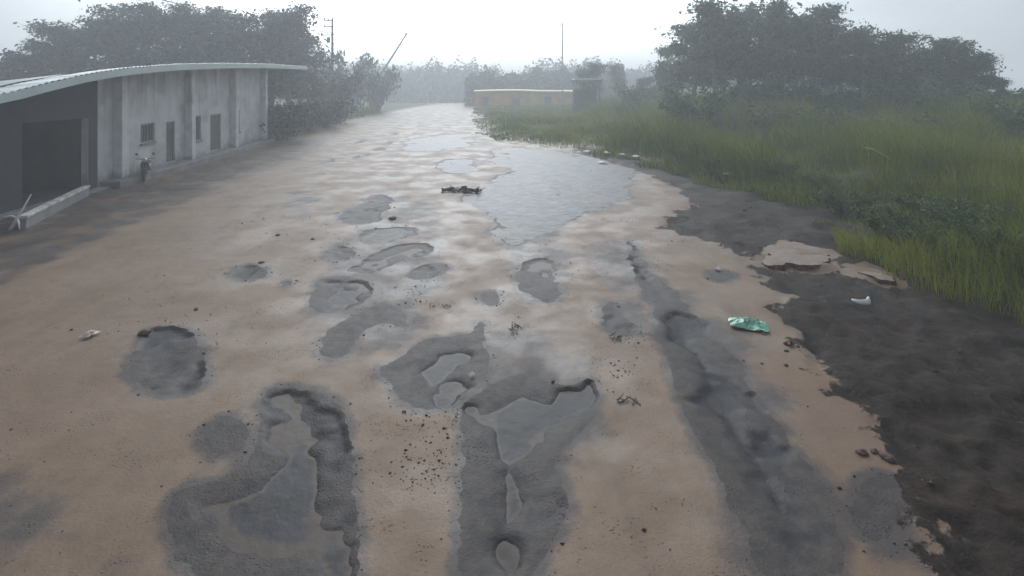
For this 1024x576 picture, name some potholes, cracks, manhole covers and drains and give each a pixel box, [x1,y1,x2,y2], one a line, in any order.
pothole [457,367,600,576]
pothole [349,243,434,274]
pothole [514,258,562,303]
pothole [337,194,395,224]
pothole [600,302,638,337]
pothole [228,265,268,280]
pothole [378,321,490,410]
pothole [308,276,374,314]
pothole [166,386,361,576]
pothole [319,305,409,359]
pothole [127,325,207,396]
